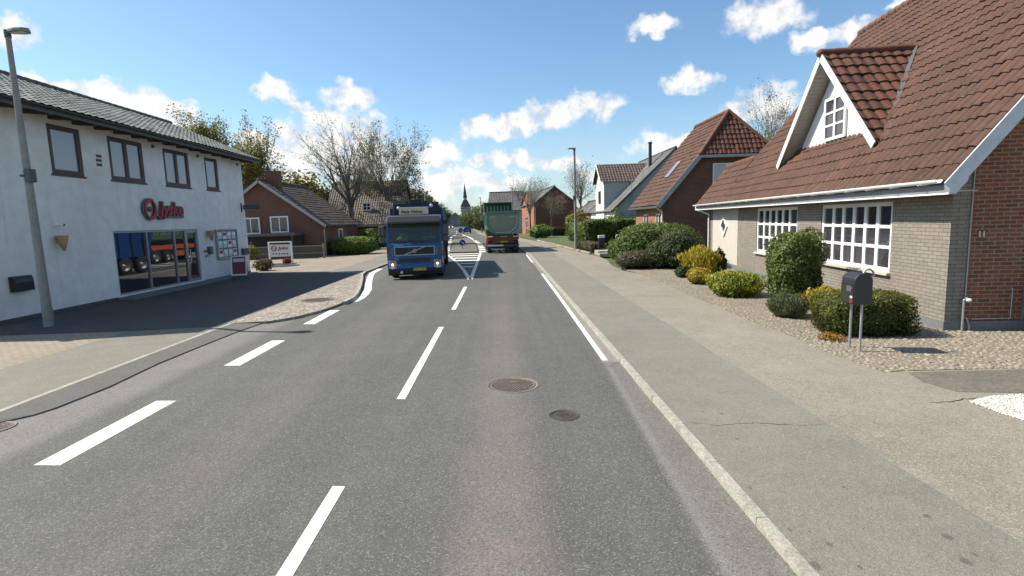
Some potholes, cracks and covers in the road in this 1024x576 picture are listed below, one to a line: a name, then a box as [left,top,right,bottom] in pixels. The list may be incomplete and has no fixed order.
manhole cover [0,421,18,432]
manhole cover [549,410,580,421]
manhole cover [487,377,539,393]
